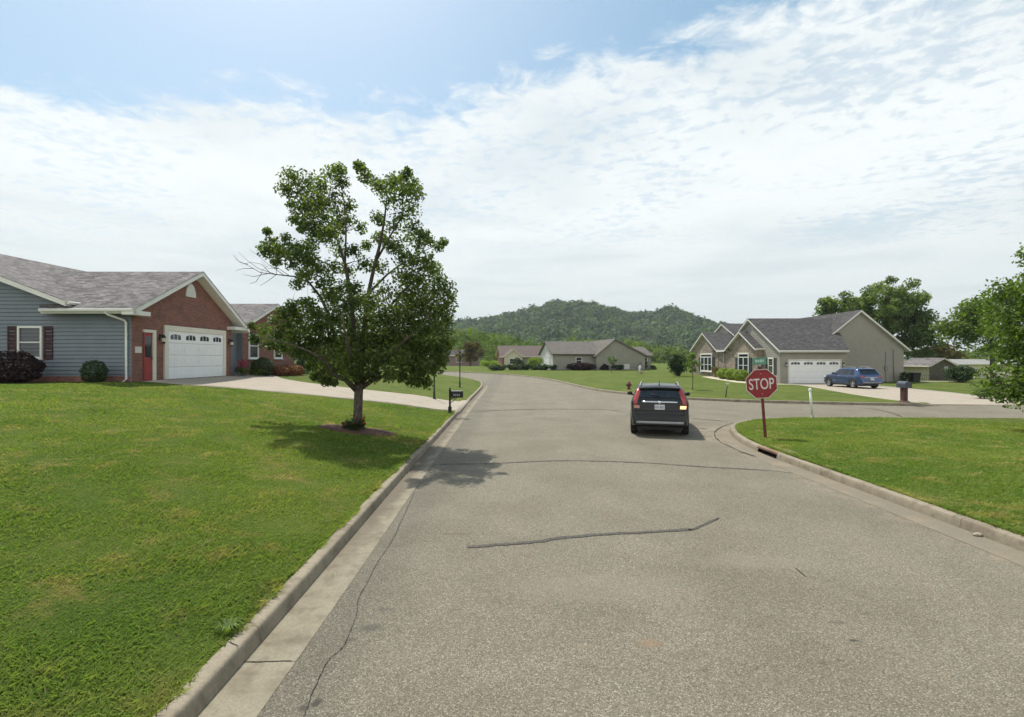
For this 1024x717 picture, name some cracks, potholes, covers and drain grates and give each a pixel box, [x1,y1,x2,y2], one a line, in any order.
drain grate [757,446,794,458]
crack [303,493,414,717]
